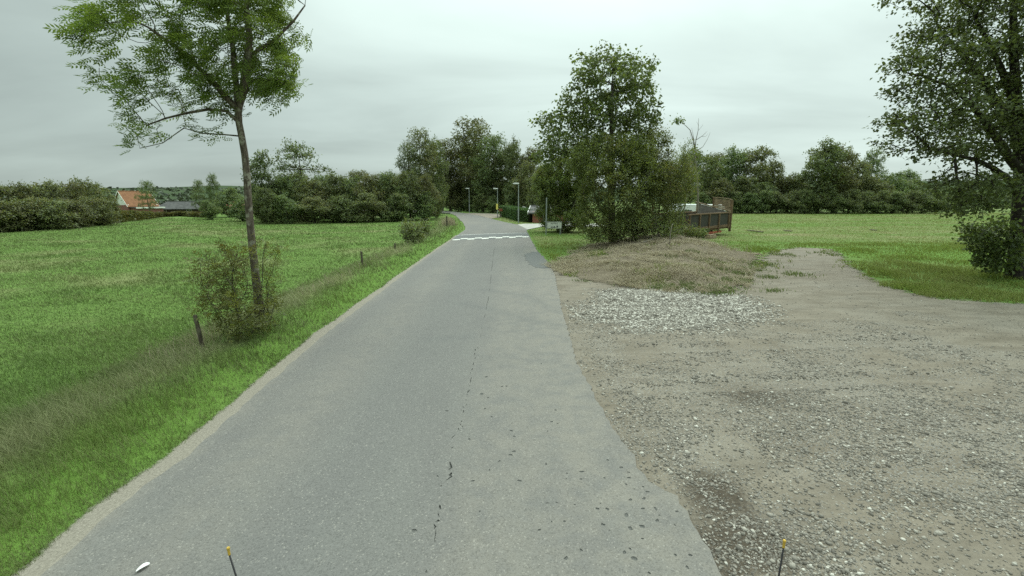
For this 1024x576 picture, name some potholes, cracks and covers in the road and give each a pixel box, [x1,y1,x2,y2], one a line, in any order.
crack [434,253,494,539]
